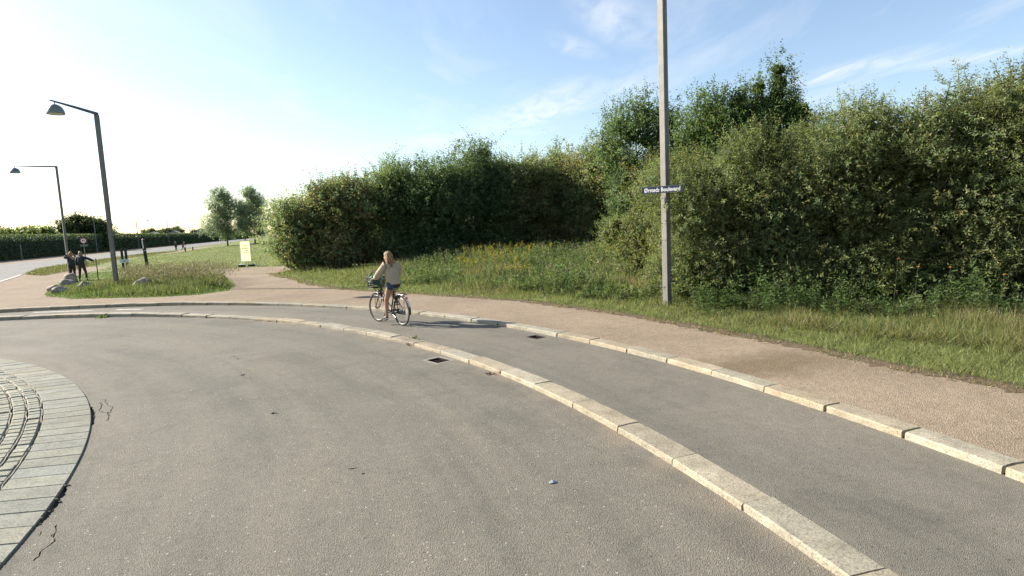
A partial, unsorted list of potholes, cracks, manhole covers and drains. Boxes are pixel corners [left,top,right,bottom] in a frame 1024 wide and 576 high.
drain grate [422,356,454,364]
crack [33,525,60,561]
